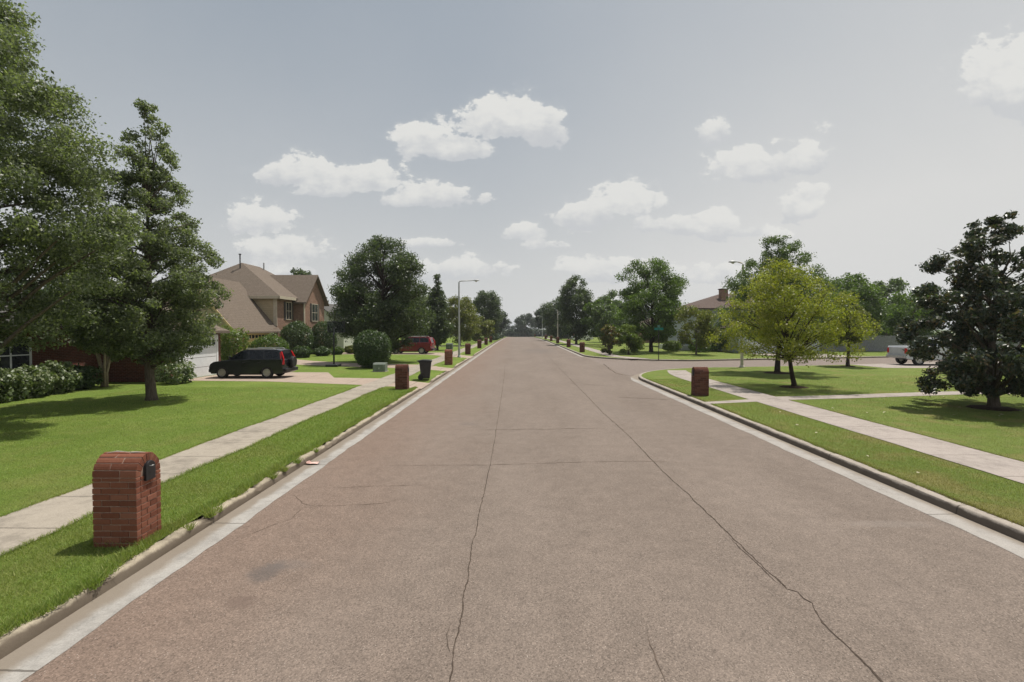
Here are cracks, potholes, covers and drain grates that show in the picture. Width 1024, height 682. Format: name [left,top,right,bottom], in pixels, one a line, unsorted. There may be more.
crack [447,357,883,682]
crack [244,484,425,536]
